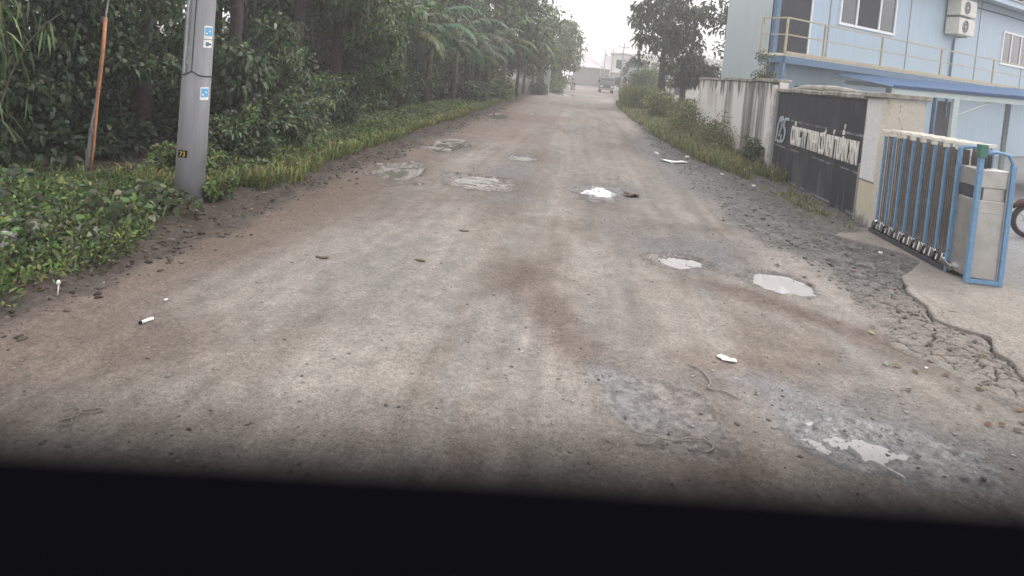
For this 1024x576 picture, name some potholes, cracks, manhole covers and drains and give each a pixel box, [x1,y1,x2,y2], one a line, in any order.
pothole [358,159,432,187]
pothole [477,111,512,122]
pothole [434,171,526,195]
pothole [731,267,831,301]
pothole [417,137,476,155]
pothole [503,152,543,163]
crack [798,232,1024,409]
pothole [564,179,632,206]
pothole [638,250,724,272]
